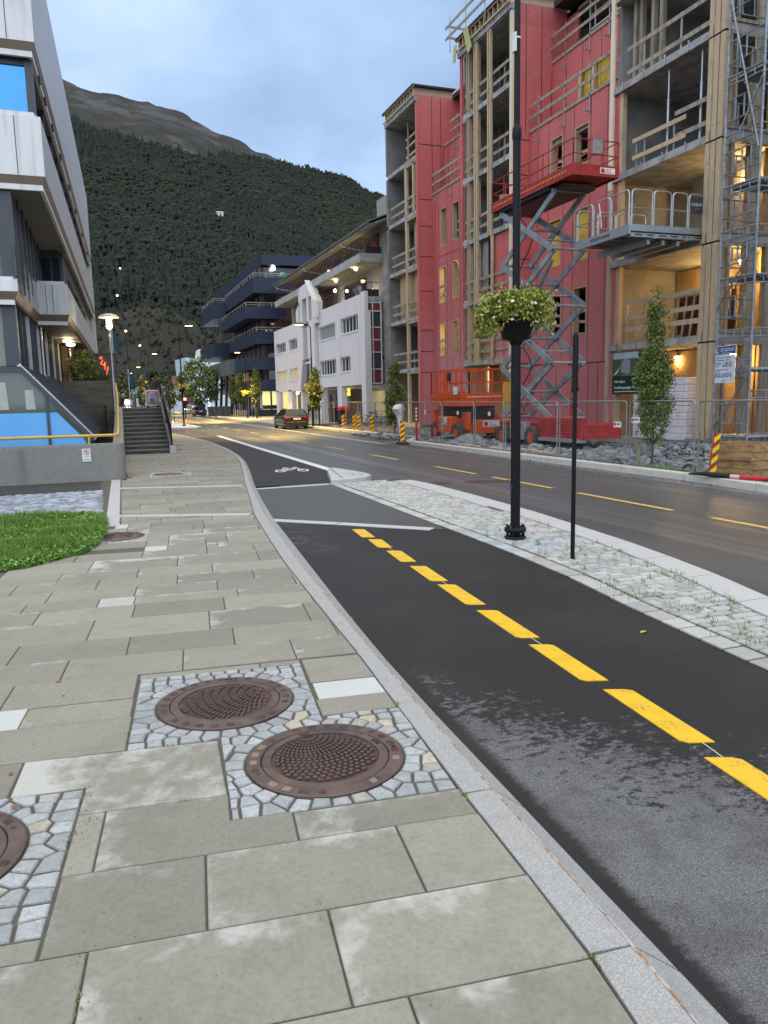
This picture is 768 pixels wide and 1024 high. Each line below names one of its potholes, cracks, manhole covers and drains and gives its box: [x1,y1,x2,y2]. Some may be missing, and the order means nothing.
manhole cover [246,724,404,800]
manhole cover [156,677,293,732]
manhole cover [0,812,28,879]
manhole cover [101,532,145,542]
